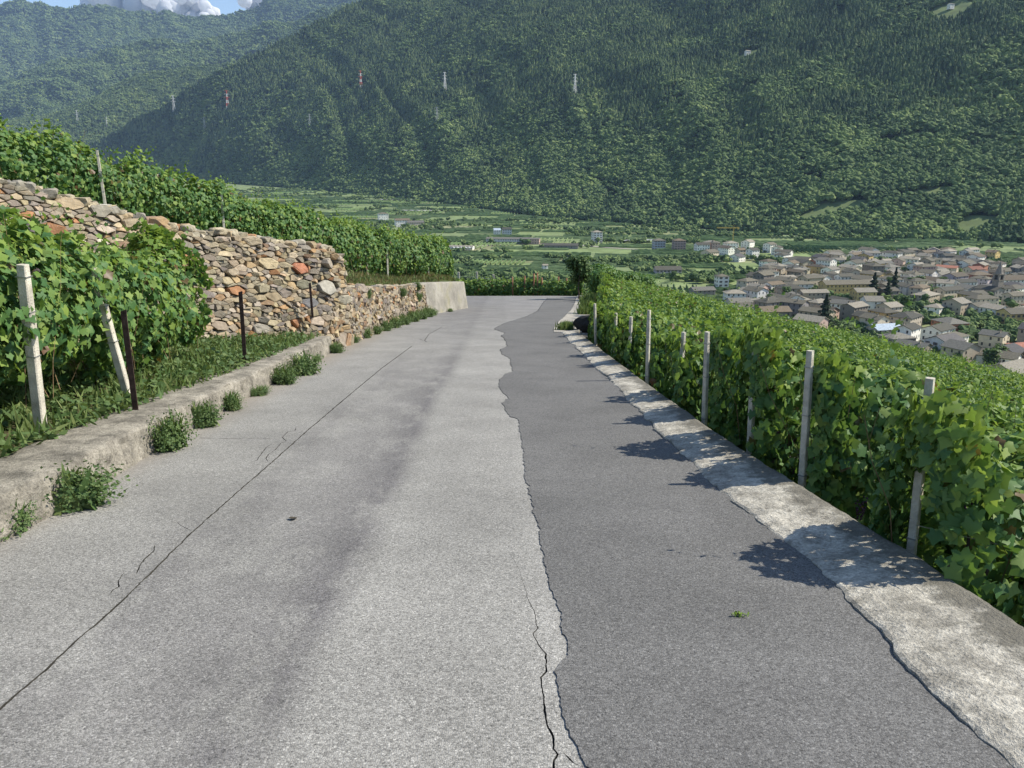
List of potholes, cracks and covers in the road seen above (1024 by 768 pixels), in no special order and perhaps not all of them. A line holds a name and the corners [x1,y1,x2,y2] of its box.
crack [513,559,580,768]
crack [0,329,438,710]
